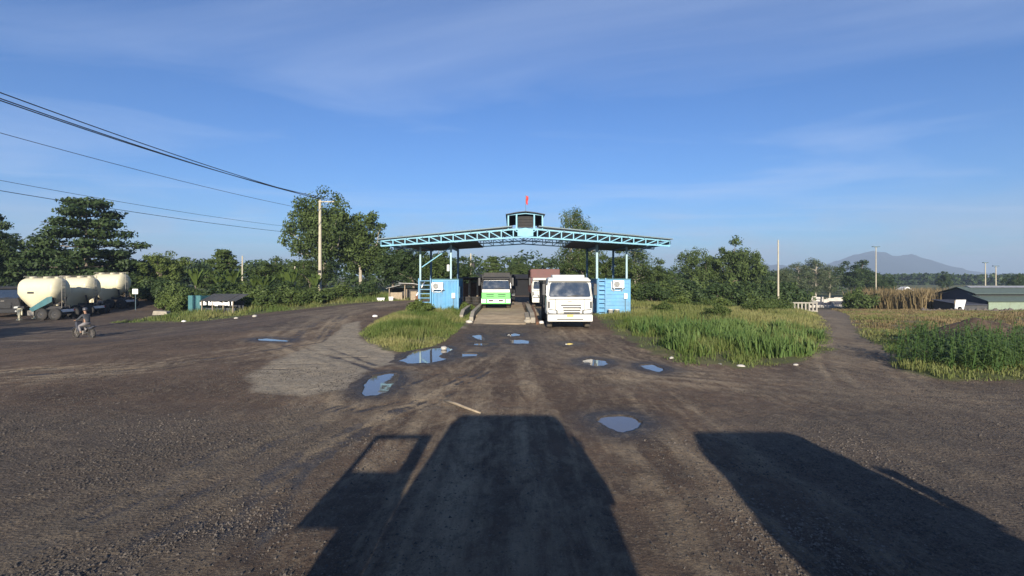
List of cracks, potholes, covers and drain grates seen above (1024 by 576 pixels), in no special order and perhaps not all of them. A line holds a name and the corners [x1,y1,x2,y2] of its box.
pothole [577,411,661,440]
pothole [631,362,675,375]
pothole [388,346,462,366]
pothole [502,338,538,346]
pothole [571,357,620,368]
pothole [349,370,408,401]
